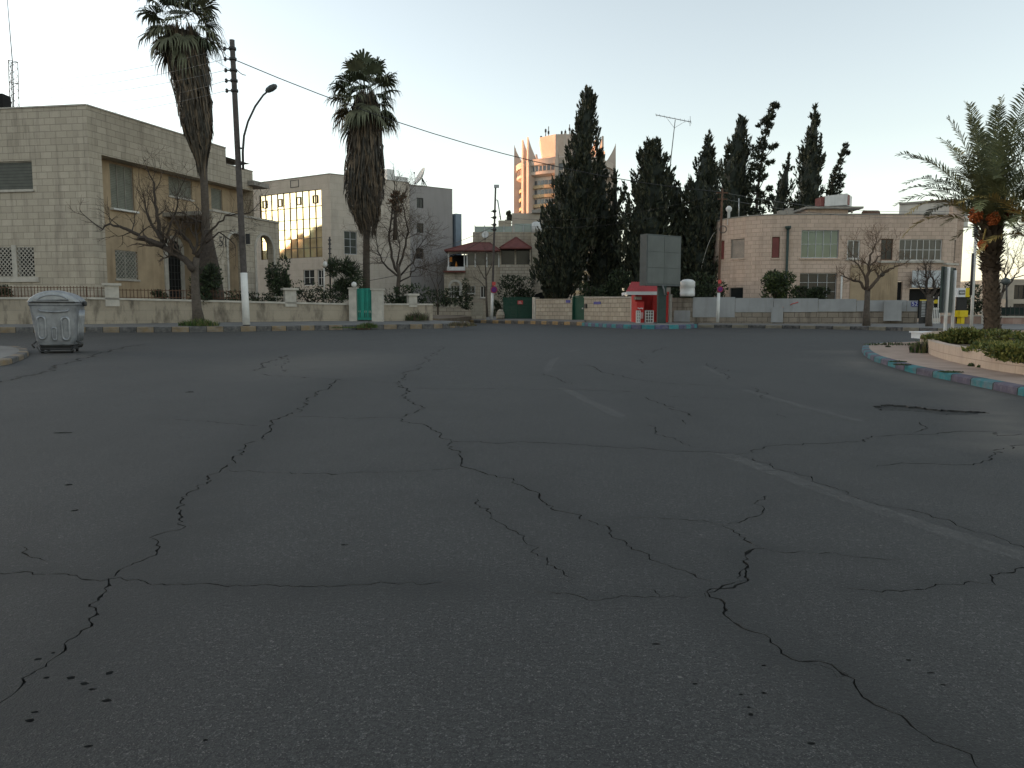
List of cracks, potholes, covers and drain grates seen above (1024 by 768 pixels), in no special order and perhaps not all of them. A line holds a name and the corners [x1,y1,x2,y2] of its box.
crack [0,346,1020,766]
pothole [873,404,986,415]
